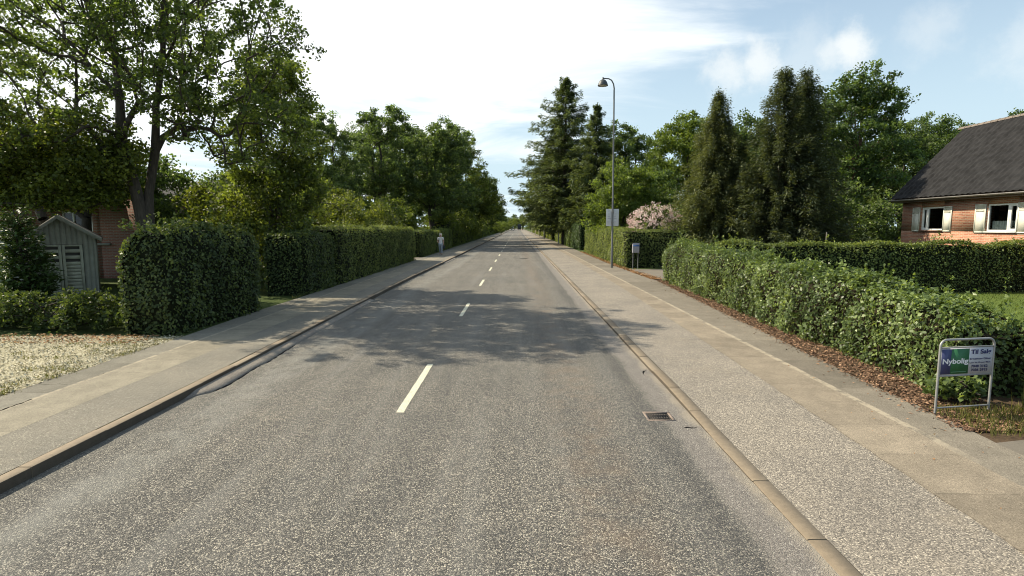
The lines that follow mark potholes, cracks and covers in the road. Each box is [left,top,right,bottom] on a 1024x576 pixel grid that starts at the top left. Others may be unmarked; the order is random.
drain grate [642,412,676,421]
